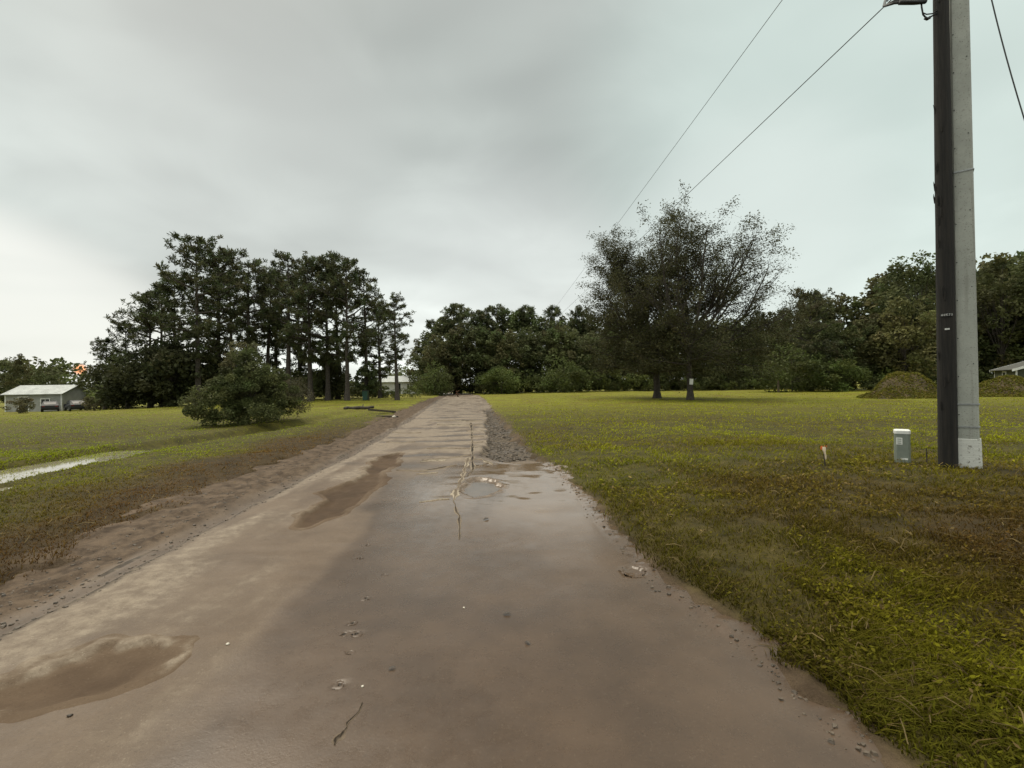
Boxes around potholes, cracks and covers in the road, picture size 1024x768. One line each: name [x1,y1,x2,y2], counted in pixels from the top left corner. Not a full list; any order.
crack [387,420,493,539]
crack [331,702,363,745]
pothole [455,477,510,499]
